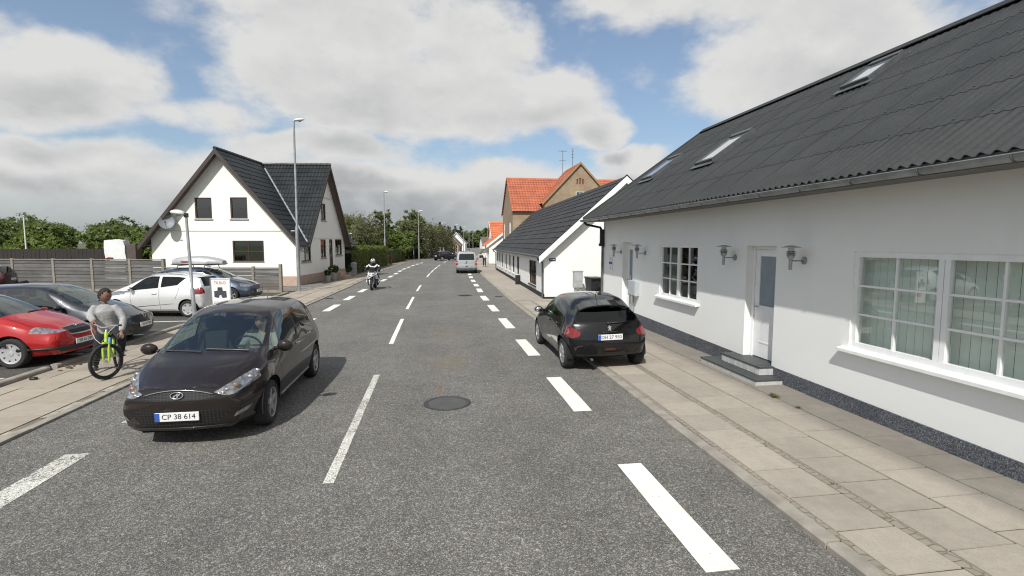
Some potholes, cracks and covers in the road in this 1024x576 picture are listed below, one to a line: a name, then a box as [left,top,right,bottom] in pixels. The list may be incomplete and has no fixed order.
manhole cover [423,396,471,411]
